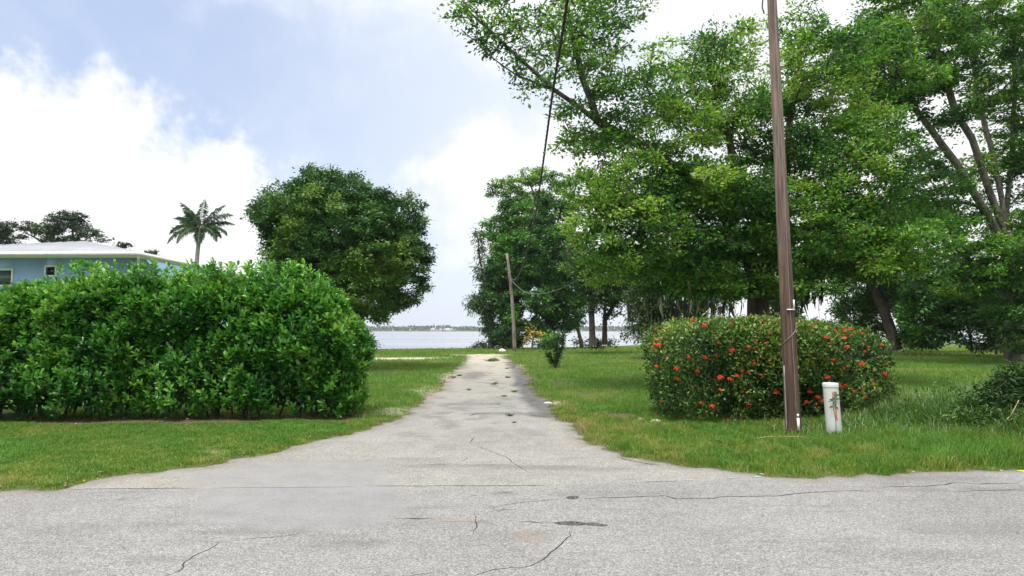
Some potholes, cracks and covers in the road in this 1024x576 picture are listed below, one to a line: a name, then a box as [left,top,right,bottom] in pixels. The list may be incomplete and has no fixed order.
crack [586,490,858,499]
crack [473,490,571,576]
crack [888,483,1009,511]
